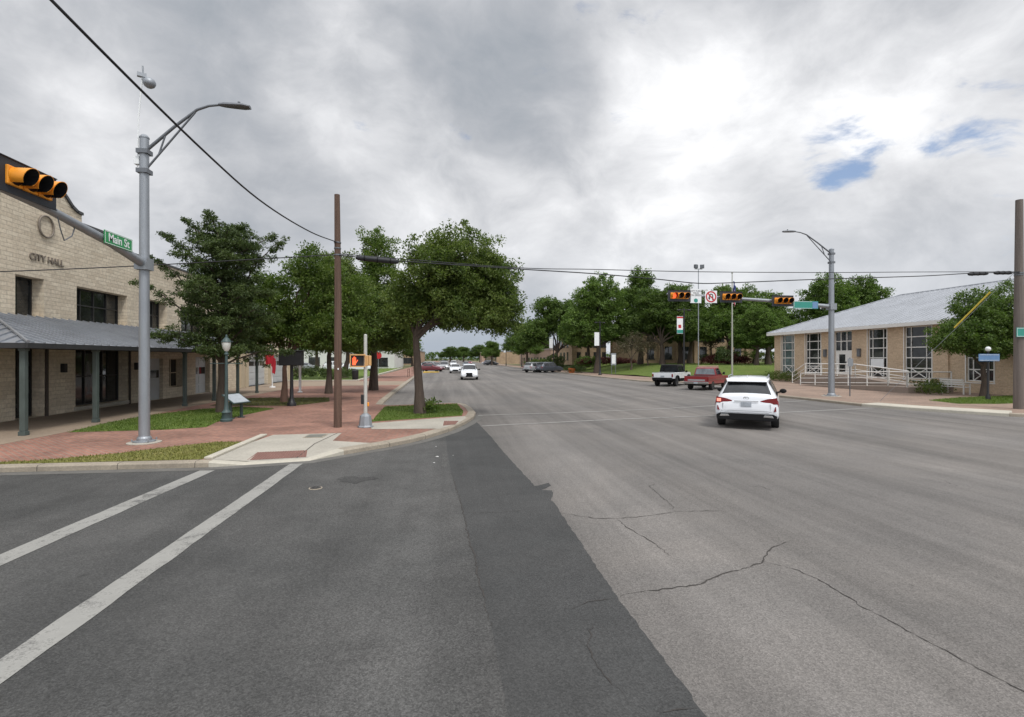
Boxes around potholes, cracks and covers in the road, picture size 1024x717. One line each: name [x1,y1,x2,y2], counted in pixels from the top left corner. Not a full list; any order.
crack [571,484,708,553]
crack [620,542,1024,691]
crack [578,628,624,694]
